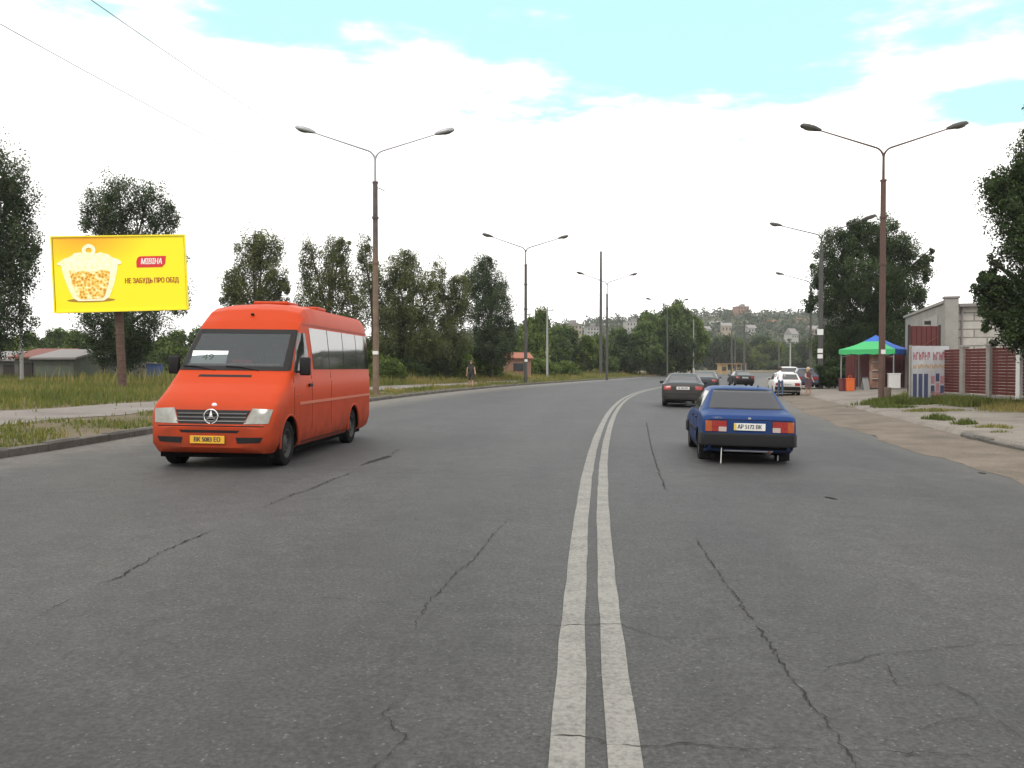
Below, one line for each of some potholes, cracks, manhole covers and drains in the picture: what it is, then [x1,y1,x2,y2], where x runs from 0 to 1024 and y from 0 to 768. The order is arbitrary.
crack [374,691,409,768]
crack [526,539,1022,768]
crack [300,519,510,629]
